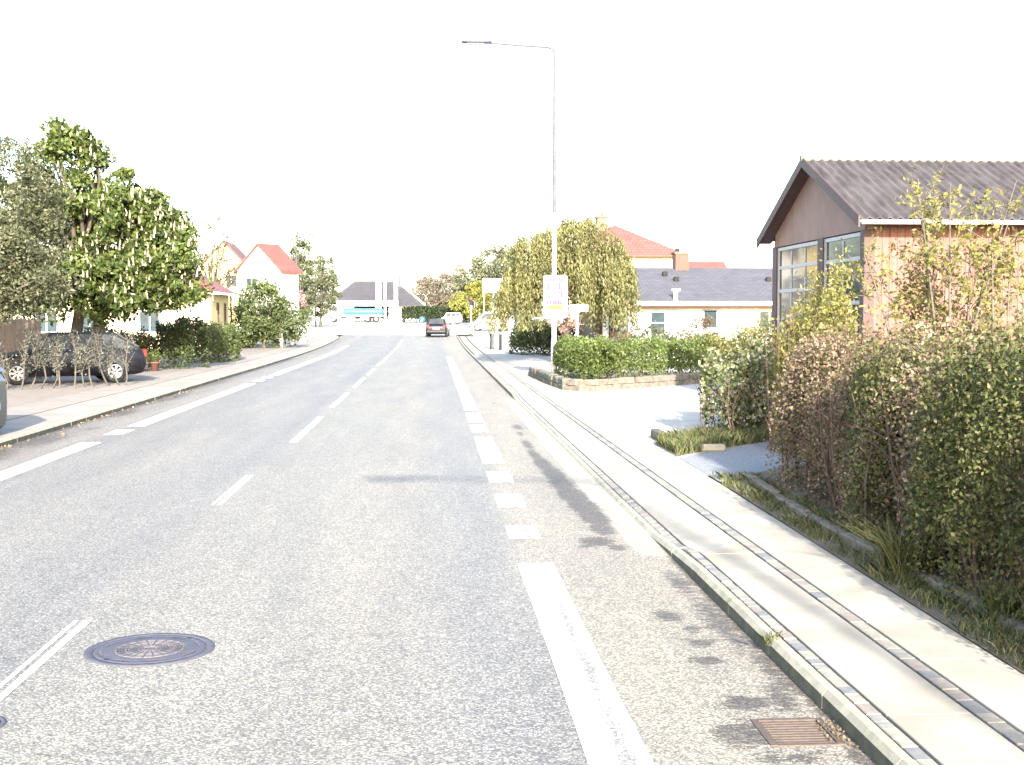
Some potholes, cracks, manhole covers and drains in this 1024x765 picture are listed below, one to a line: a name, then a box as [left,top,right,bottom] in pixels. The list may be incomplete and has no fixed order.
drain grate [750,717,847,747]
manhole cover [83,633,215,667]
